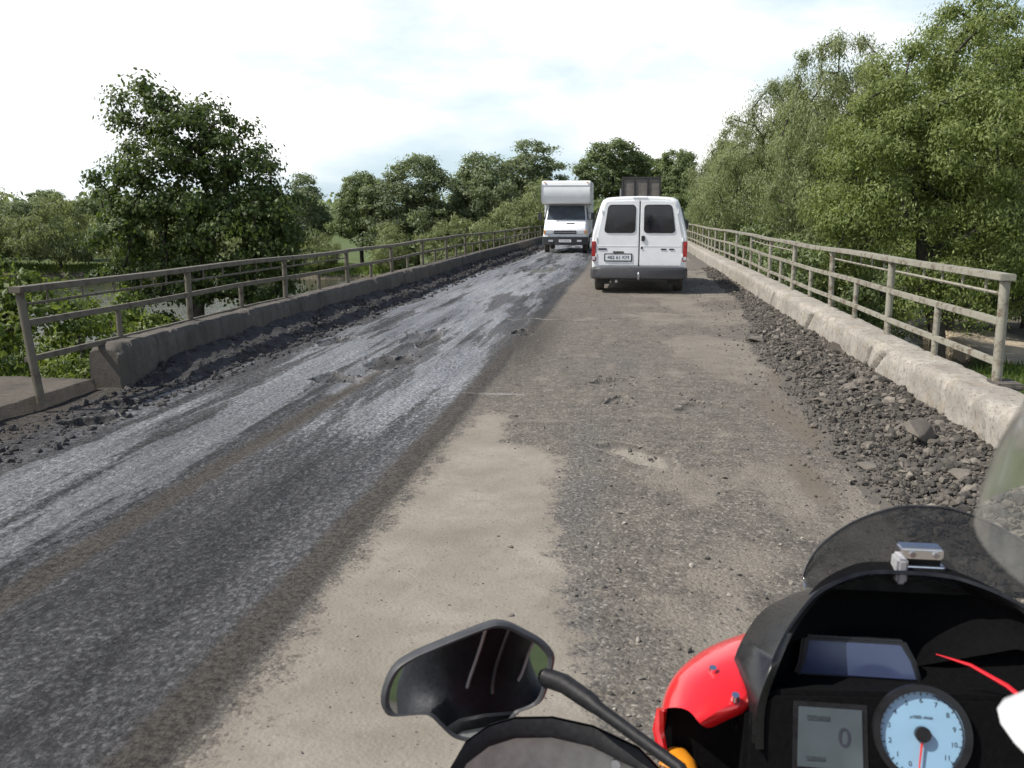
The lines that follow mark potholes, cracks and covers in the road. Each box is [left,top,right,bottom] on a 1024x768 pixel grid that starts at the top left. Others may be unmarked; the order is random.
pothole [599,393,637,408]
pothole [584,375,641,390]
pothole [584,438,687,473]
pothole [394,327,446,351]
pothole [357,353,423,372]
